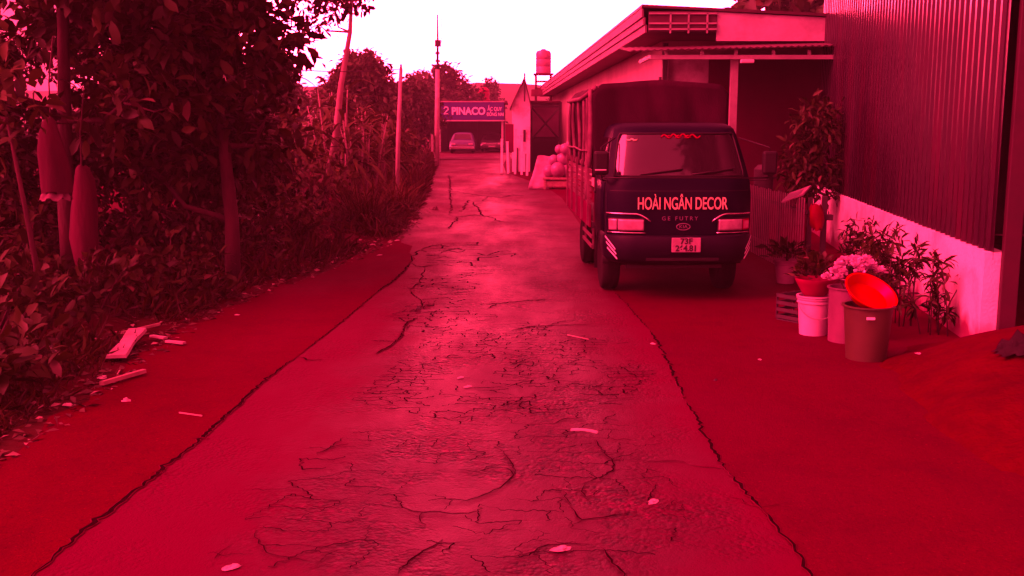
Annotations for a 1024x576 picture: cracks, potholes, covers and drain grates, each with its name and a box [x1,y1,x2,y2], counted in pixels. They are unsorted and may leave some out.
crack [503,542,626,576]
crack [731,496,792,508]
crack [552,418,724,524]
crack [29,174,522,576]
crack [512,320,599,331]
